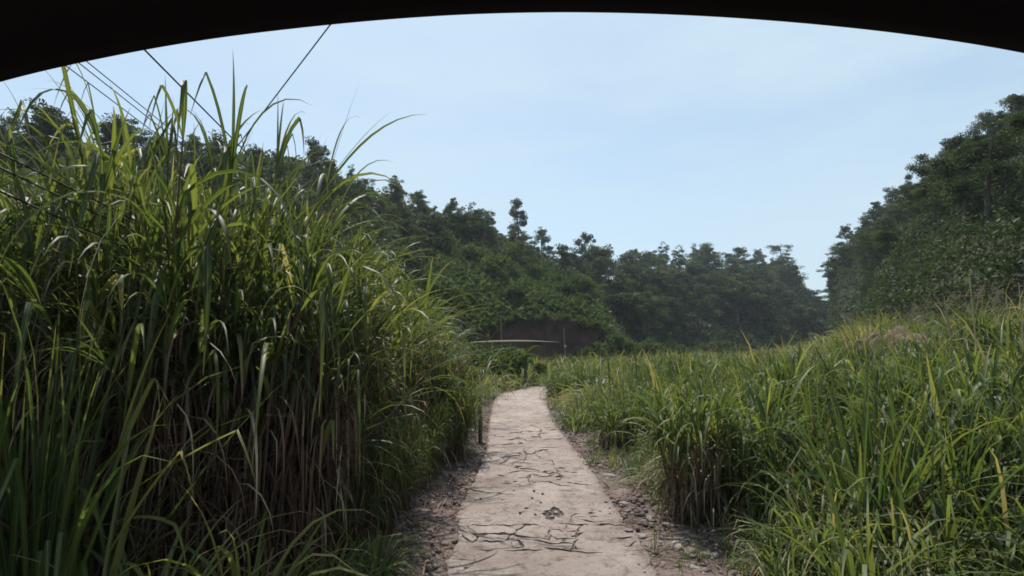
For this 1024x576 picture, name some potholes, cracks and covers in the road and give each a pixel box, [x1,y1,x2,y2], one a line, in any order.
crack [462,512,636,556]
crack [471,416,588,494]
pothole [542,507,564,520]
